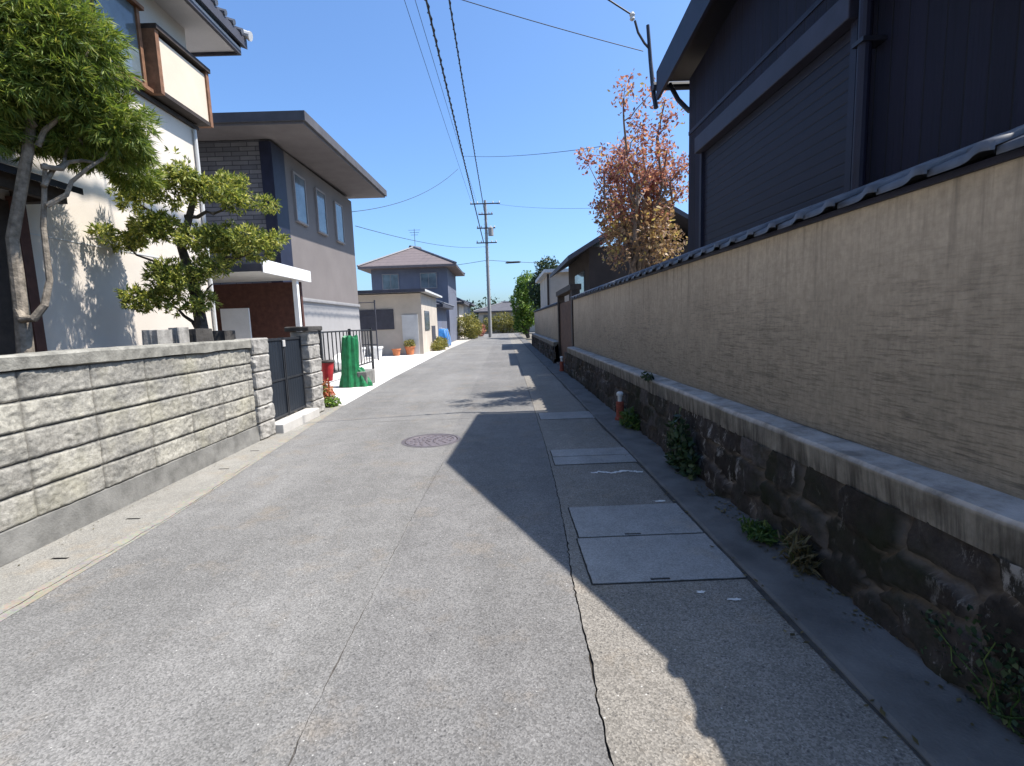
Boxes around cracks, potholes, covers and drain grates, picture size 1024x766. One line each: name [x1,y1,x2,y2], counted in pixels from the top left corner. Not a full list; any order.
manhole cover [401,433,461,448]
crack [513,348,614,766]
